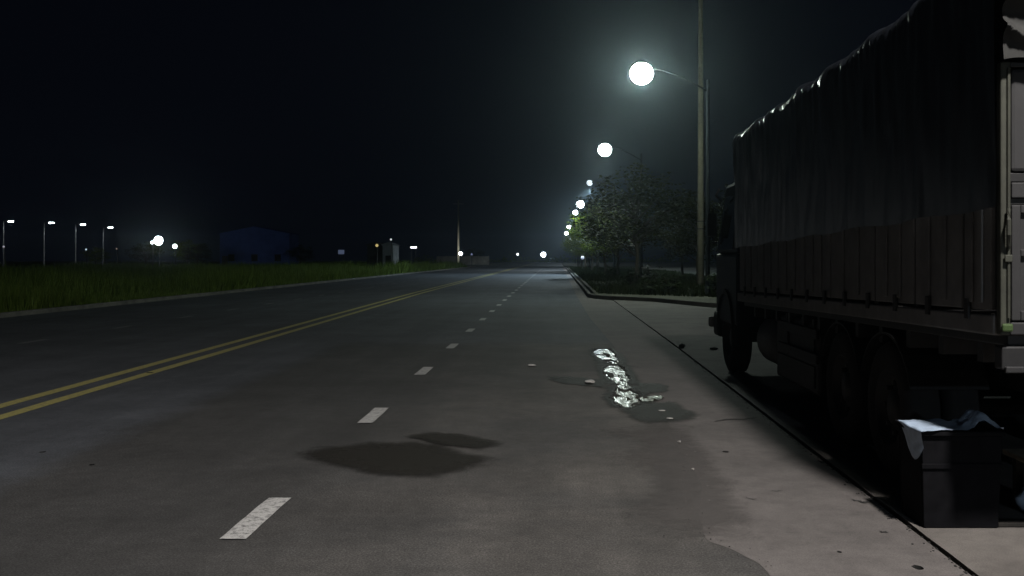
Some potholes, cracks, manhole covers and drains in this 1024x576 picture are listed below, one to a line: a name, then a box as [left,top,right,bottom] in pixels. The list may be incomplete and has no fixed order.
pothole [604,365,630,383]
pothole [612,387,640,407]
pothole [593,348,619,364]
